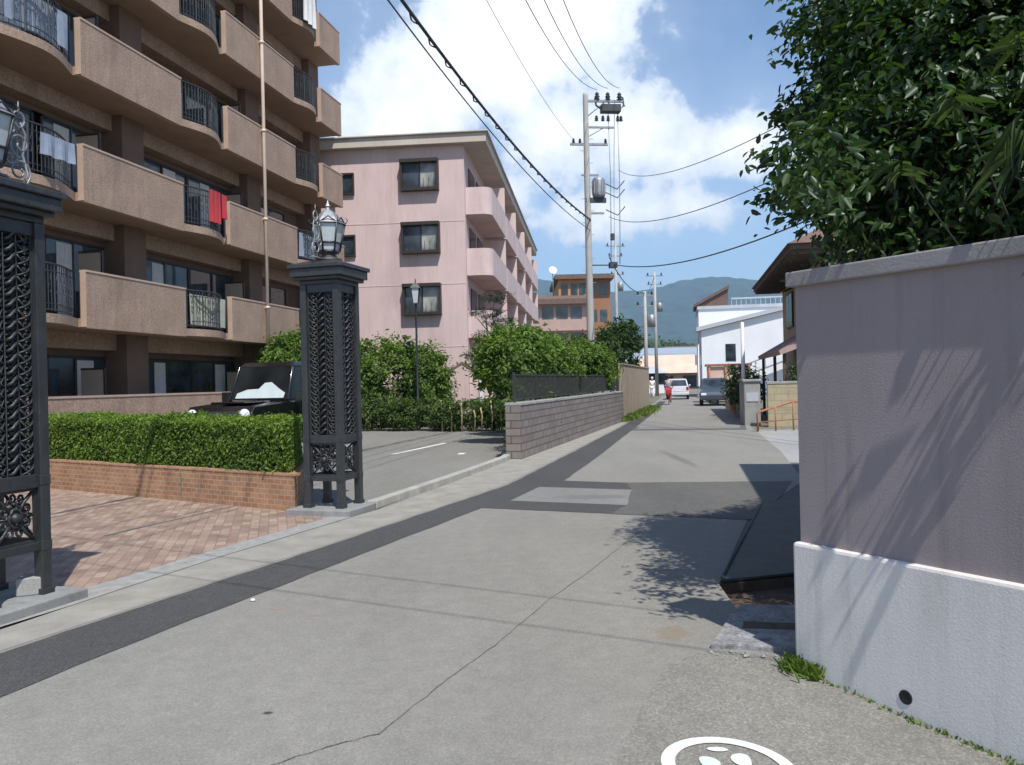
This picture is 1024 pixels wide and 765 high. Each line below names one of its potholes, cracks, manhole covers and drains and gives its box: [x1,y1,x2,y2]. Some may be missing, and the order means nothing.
crack [271,531,640,765]
